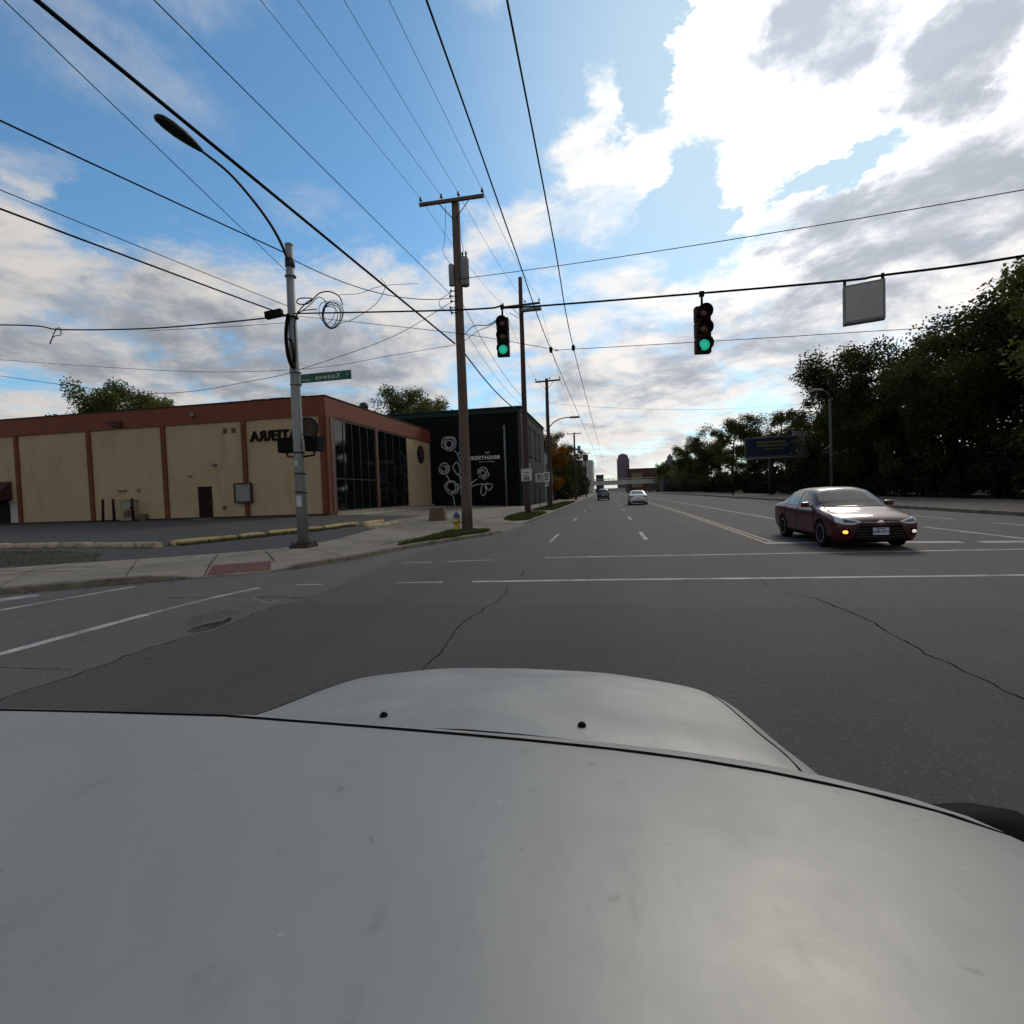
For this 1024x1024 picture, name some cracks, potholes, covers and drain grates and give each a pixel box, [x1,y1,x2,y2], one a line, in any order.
pothole [186,618,232,633]
crack [421,571,525,670]
crack [784,592,1024,700]
pothole [183,611,240,628]
